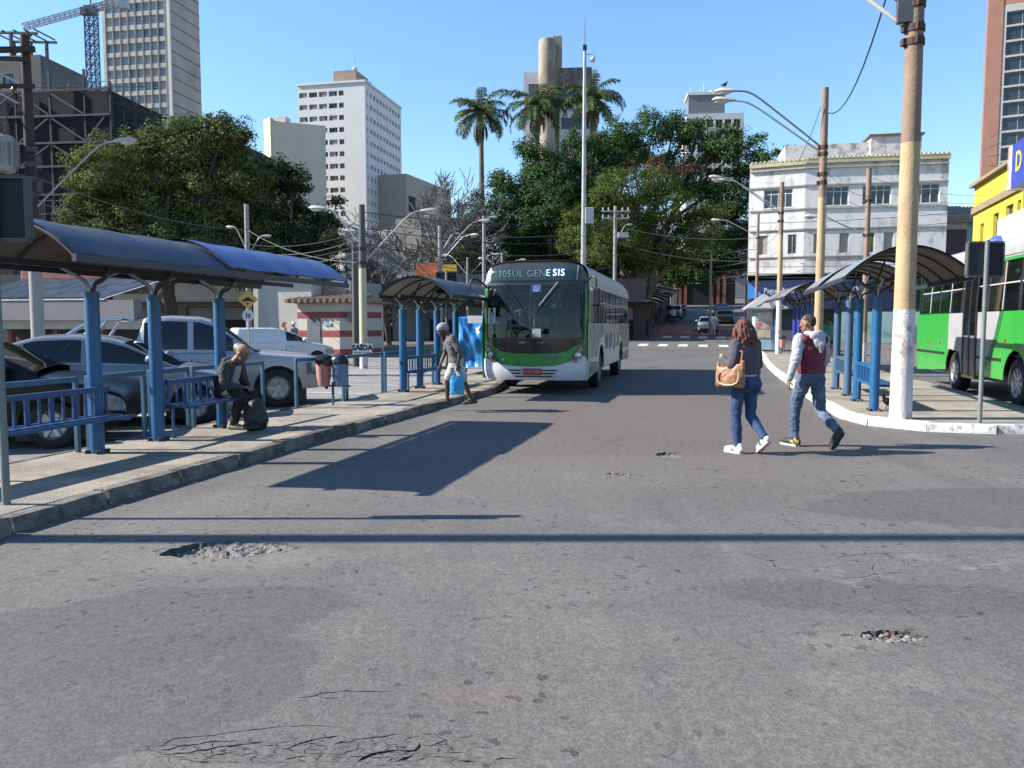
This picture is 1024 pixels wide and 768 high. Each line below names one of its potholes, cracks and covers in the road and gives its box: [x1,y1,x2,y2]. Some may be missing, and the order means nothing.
pothole [159,541,301,559]
crack [841,552,928,579]
crack [132,725,523,767]
crack [297,690,390,699]
pothole [860,630,930,643]
